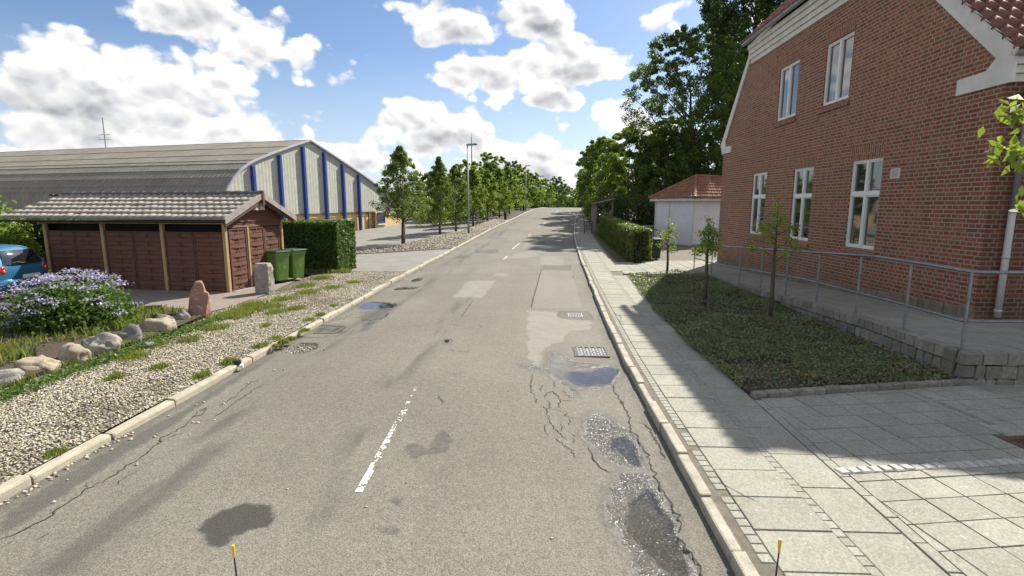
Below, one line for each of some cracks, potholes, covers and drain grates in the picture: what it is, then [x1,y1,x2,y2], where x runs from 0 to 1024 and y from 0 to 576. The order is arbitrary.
pothole [358,302,398,310]
pothole [577,412,647,469]
crack [613,385,703,576]
crack [530,375,609,472]
pothole [601,477,706,576]
pothole [549,362,622,398]
